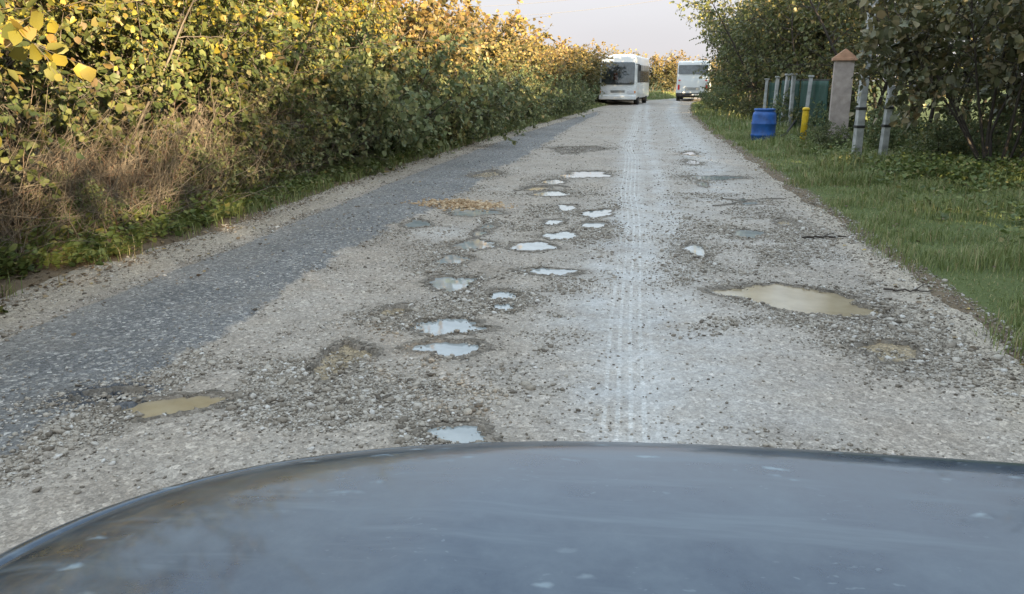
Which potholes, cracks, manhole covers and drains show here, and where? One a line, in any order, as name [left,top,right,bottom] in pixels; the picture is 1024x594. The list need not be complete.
pothole [418,273,487,295]
pothole [295,336,384,387]
pothole [481,287,529,304]
pothole [556,170,614,179]
pothole [483,299,522,314]
pothole [503,240,562,253]
pothole [394,337,497,361]
pothole [396,315,503,338]
pothole [536,230,582,241]
pothole [840,336,935,366]
pothole [506,266,587,277]
pothole [94,389,250,423]
